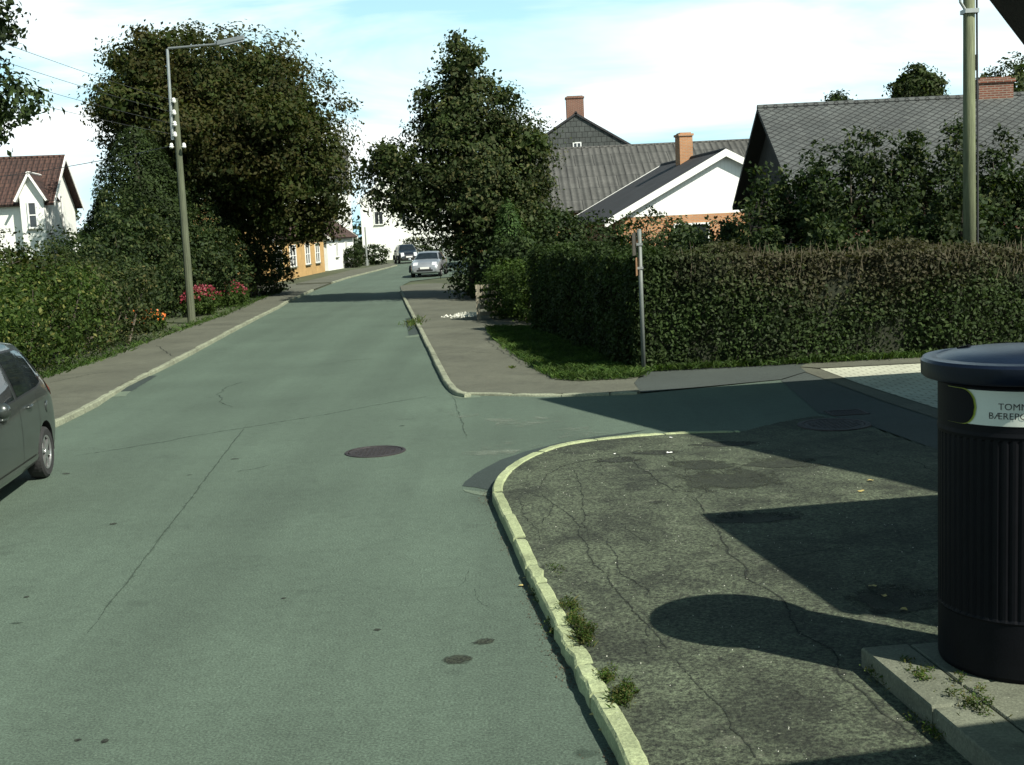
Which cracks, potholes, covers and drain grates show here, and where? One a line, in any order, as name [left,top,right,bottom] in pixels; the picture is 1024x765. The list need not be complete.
crack [89,396,426,628]
manhole cover [797,418,871,431]
manhole cover [345,445,406,458]
crack [520,443,941,758]
